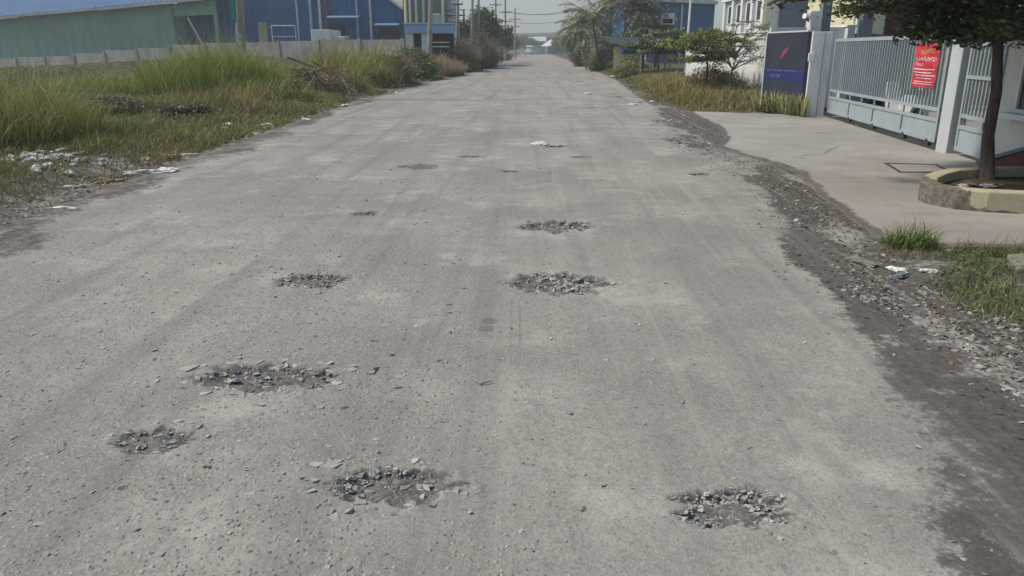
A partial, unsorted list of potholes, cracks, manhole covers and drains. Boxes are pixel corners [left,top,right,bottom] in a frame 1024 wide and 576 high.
pothole [295,457,488,513]
pothole [98,419,212,461]
pothole [258,269,366,292]
pothole [386,163,454,171]
pothole [168,356,381,398]
pothole [652,480,817,537]
pothole [509,218,605,236]
pothole [487,269,635,300]
